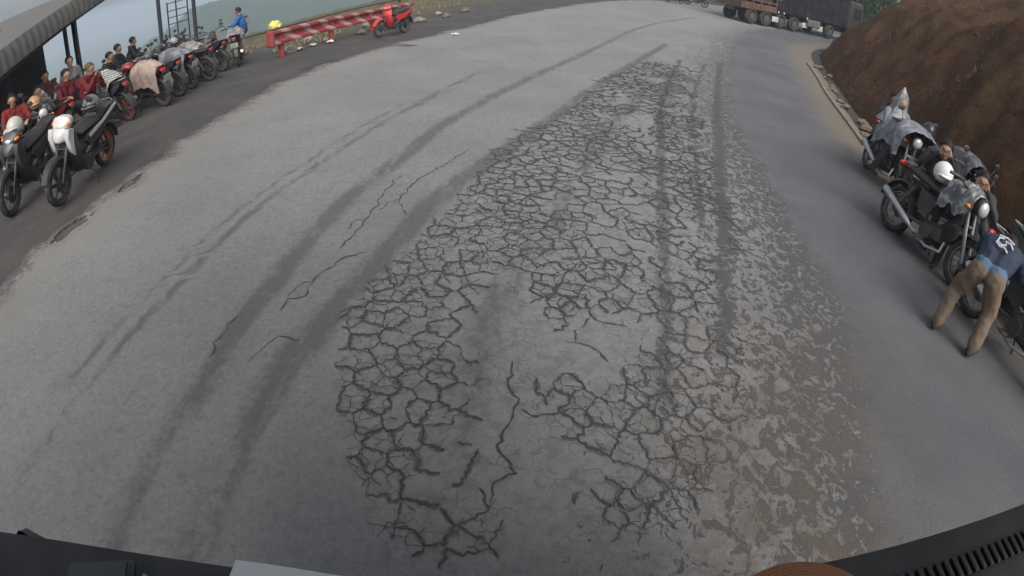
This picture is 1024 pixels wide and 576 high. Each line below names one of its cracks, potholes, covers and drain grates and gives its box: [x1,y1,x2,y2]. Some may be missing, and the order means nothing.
crack [280,61,748,569]
pothole [44,211,96,248]
pothole [112,171,151,196]
